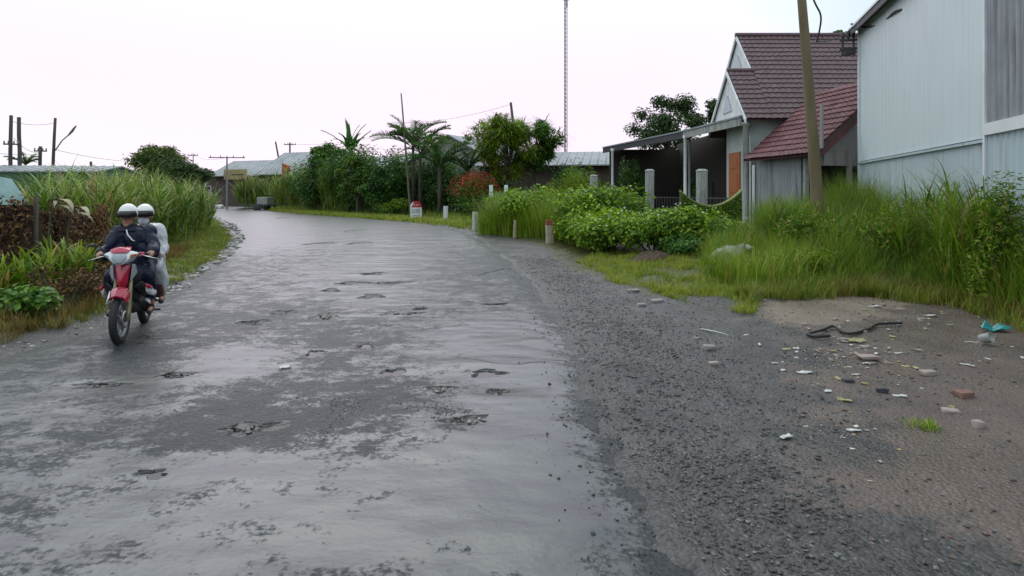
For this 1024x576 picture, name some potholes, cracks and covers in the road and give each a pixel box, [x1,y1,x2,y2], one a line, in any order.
pothole [305,350,326,358]
pothole [133,468,168,480]
pothole [434,414,489,426]
pothole [216,420,294,437]
pothole [378,367,406,377]
pothole [471,368,510,378]
pothole [307,312,341,320]
